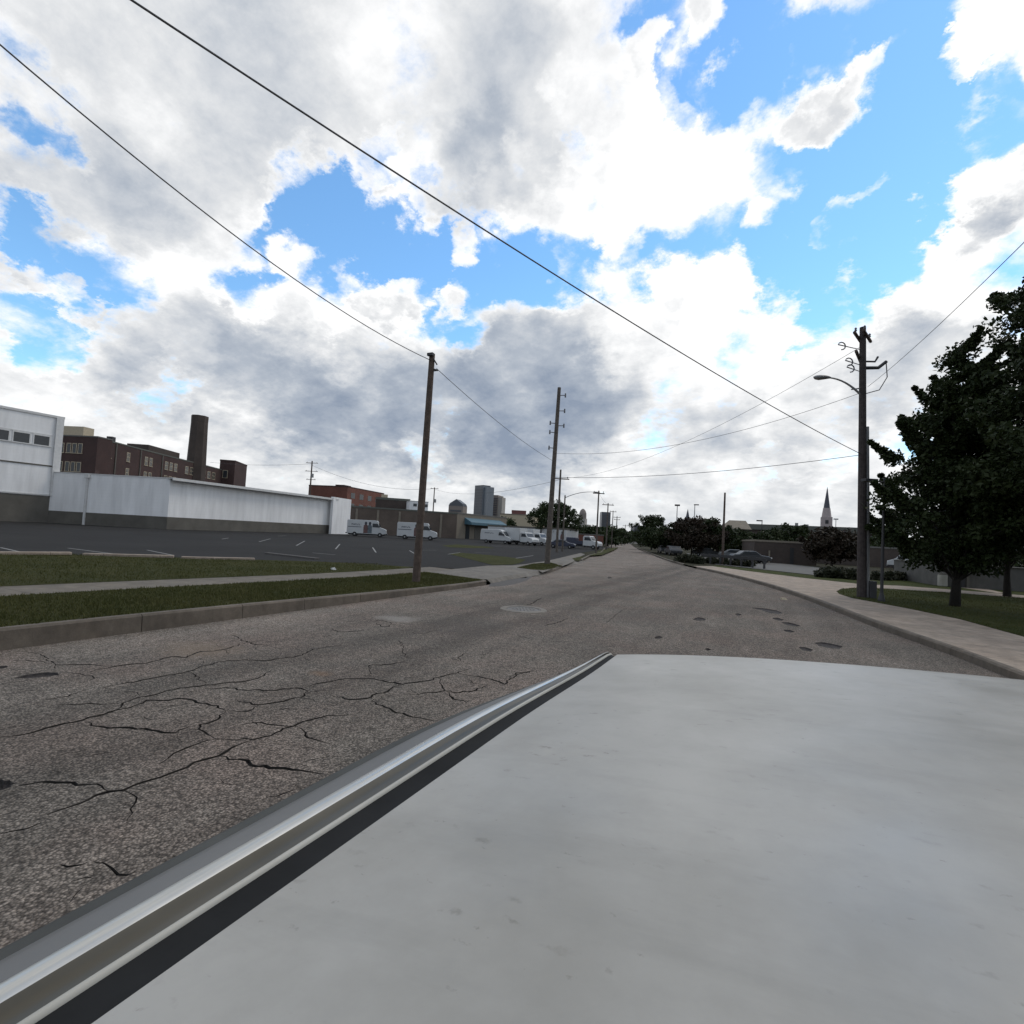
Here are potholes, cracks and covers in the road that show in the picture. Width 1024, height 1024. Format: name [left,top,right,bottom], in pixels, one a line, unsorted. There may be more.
manhole cover [500,605,547,613]
pothole [0,779,15,790]
crack [0,620,535,903]
